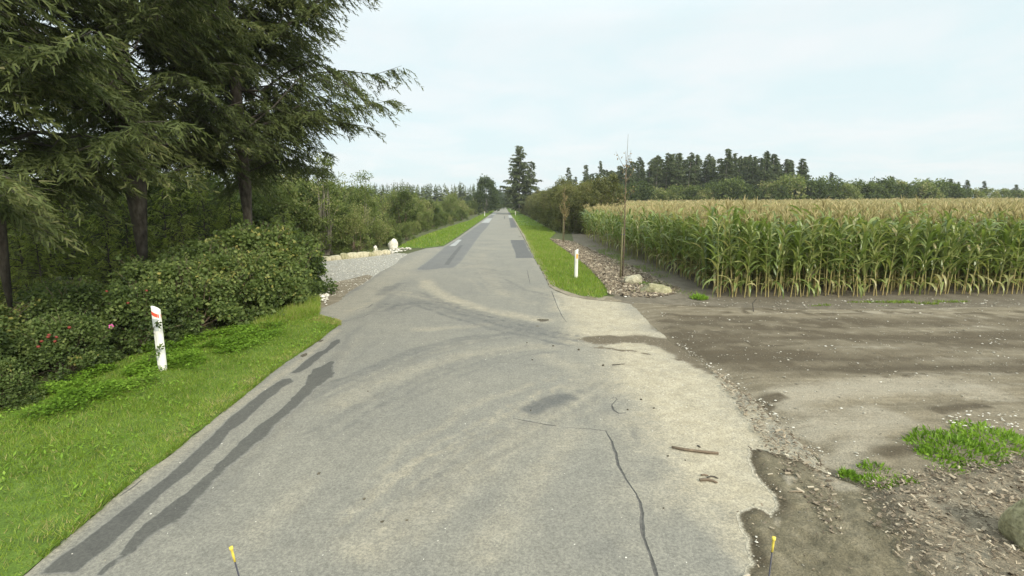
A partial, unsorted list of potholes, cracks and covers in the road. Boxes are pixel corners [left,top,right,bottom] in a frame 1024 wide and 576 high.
crack [581,397,658,576]
